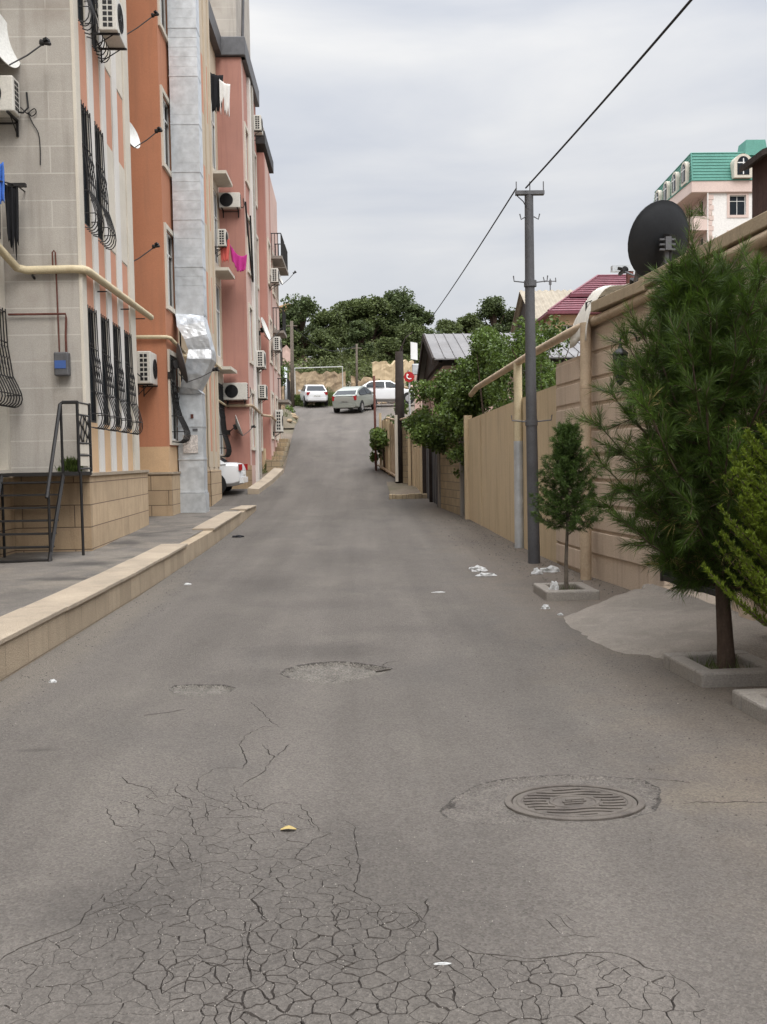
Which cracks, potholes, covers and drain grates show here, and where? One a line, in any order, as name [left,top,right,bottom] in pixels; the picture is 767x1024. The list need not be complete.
pothole [280,661,393,684]
manhole cover [504,784,645,821]
pothole [169,684,236,696]
crack [0,704,705,1024]
